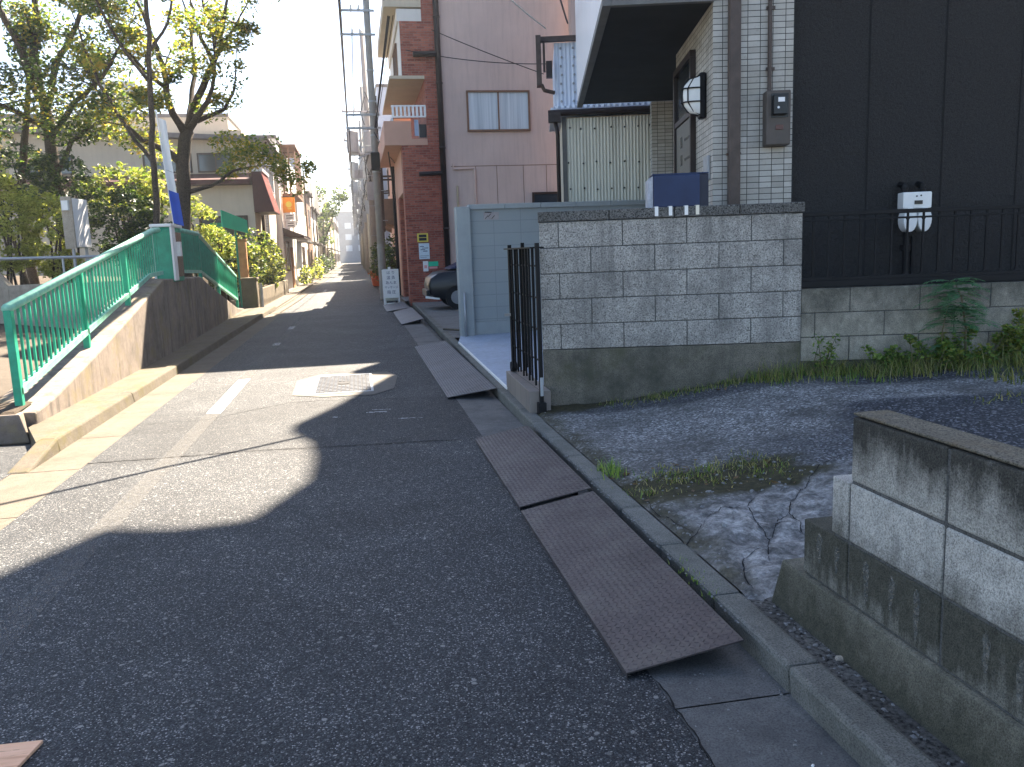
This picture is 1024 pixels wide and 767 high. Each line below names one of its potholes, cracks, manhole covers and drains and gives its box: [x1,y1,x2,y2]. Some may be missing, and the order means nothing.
crack [644,453,844,588]
manhole cover [292,371,398,397]
